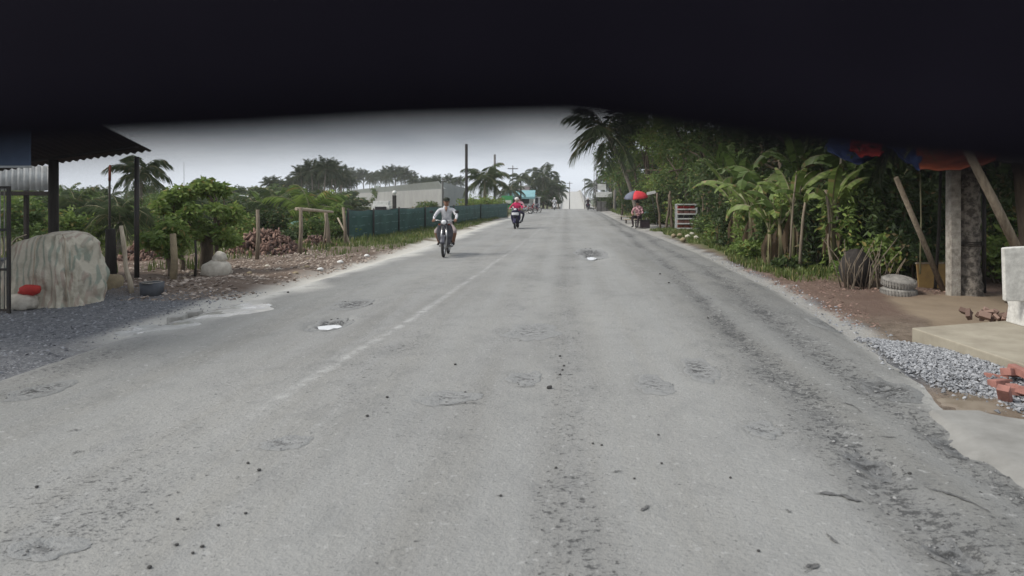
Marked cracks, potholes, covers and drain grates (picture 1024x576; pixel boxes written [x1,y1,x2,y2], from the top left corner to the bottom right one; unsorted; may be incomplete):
crack [820,491,863,502]
pothole [304,317,355,332]
crack [929,488,990,512]
pothole [681,358,721,384]
pothole [572,248,609,261]
